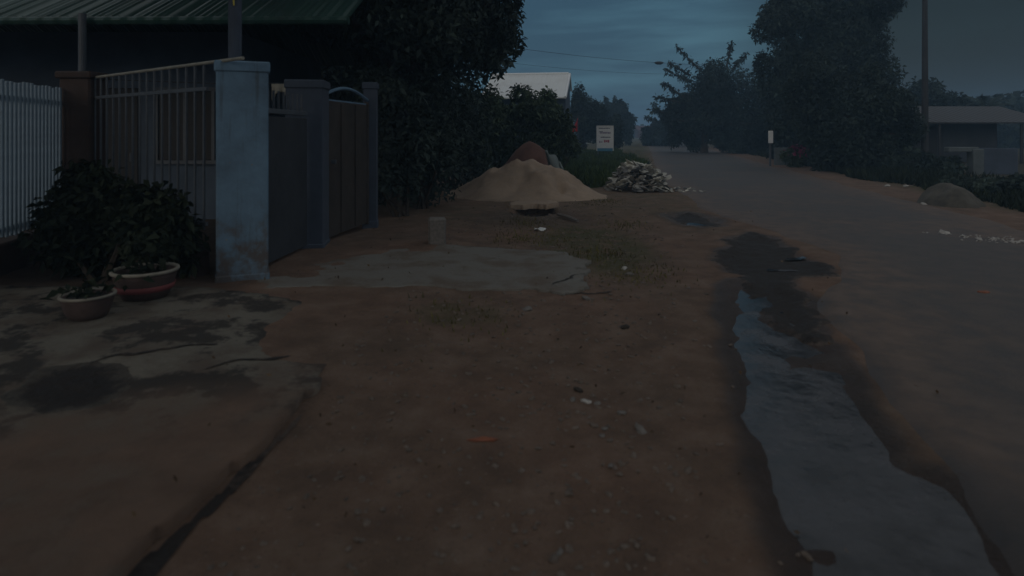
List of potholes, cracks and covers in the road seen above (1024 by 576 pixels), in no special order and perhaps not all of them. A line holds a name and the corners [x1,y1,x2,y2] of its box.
crack [77,343,289,369]
pothole [711,232,841,346]
pothole [661,212,721,227]
